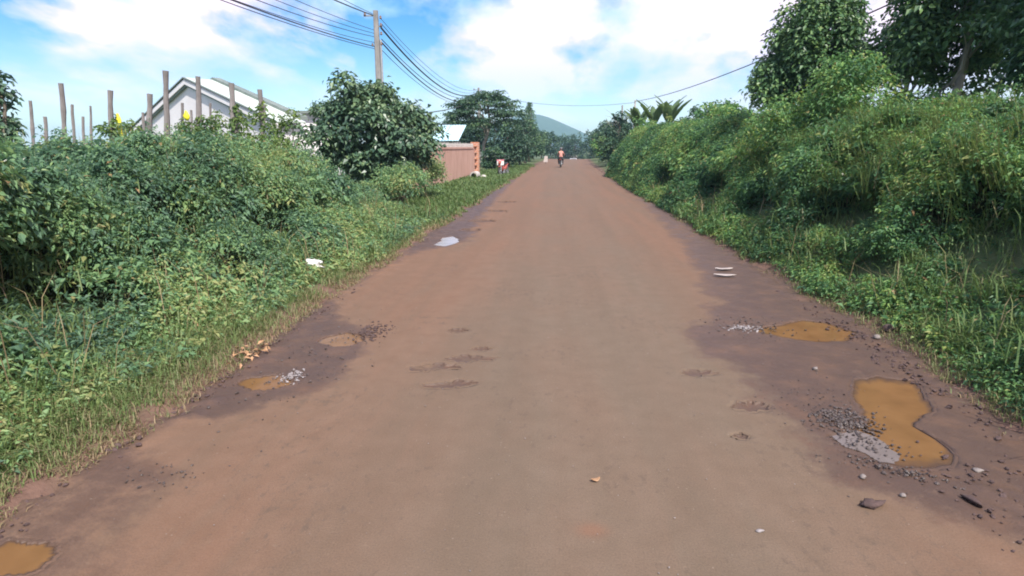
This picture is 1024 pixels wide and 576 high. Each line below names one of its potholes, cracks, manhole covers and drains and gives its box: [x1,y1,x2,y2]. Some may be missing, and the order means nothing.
pothole [408,362,465,372]
pothole [420,379,481,390]
pothole [678,369,721,378]
pothole [729,400,772,413]
pothole [443,354,502,364]
pothole [748,319,862,344]
pothole [312,331,368,349]
pothole [827,374,959,473]
pothole [0,536,64,576]
pothole [230,373,301,394]
